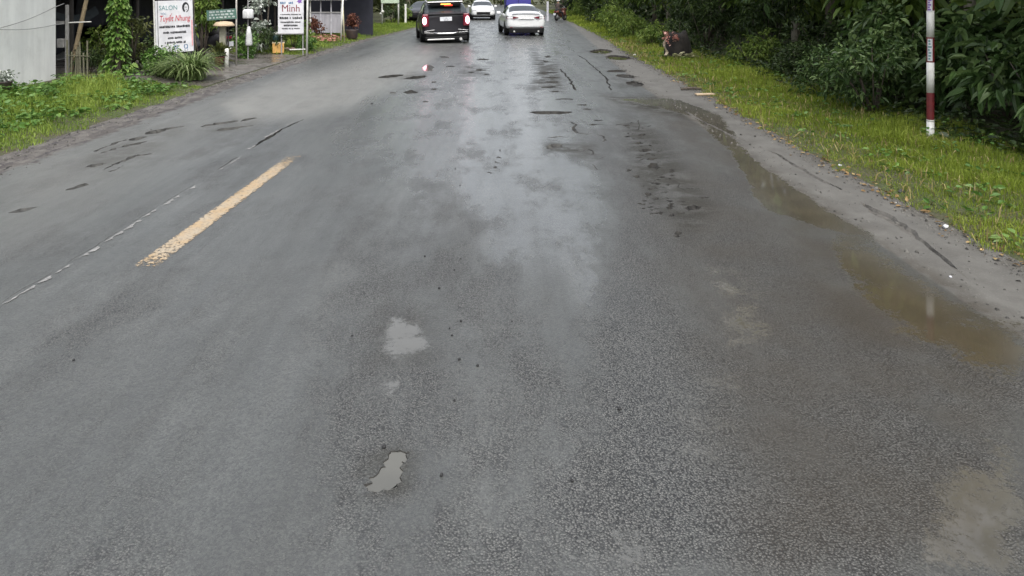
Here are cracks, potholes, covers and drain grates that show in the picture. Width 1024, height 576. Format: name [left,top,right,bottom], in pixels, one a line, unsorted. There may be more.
pothole [364,450,409,494]
pothole [201,117,256,131]
crack [540,56,606,170]
pothole [95,126,184,154]
crack [217,119,304,170]
